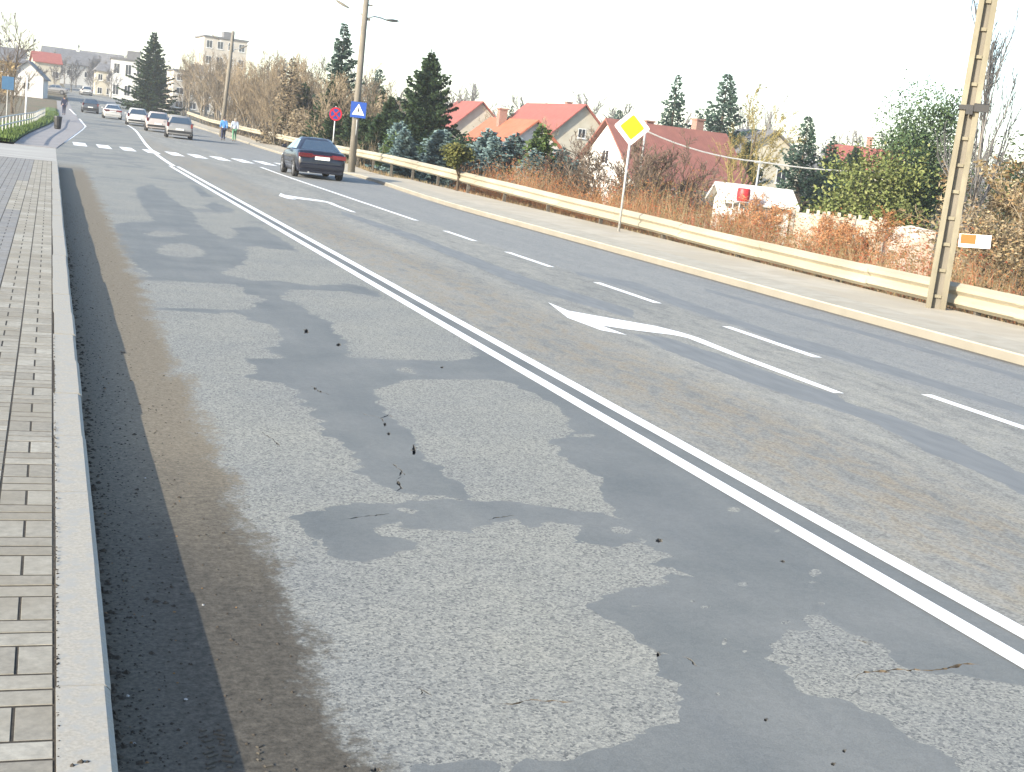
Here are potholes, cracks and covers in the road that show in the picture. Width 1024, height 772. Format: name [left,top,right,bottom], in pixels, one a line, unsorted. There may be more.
crack [856,663,972,677]
